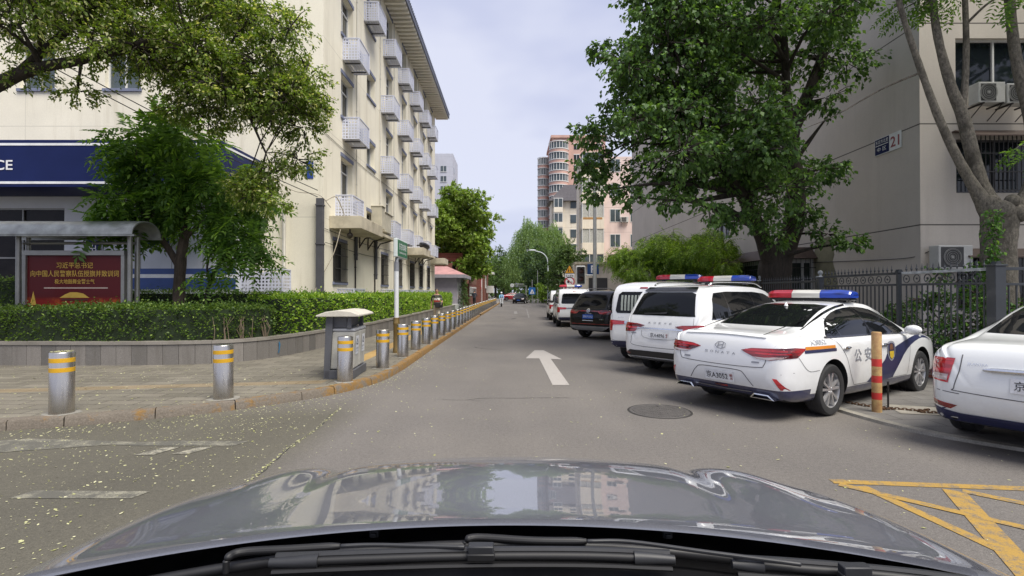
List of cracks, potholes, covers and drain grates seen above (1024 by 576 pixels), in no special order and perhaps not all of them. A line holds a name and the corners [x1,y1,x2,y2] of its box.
manhole cover [627,404,693,419]
